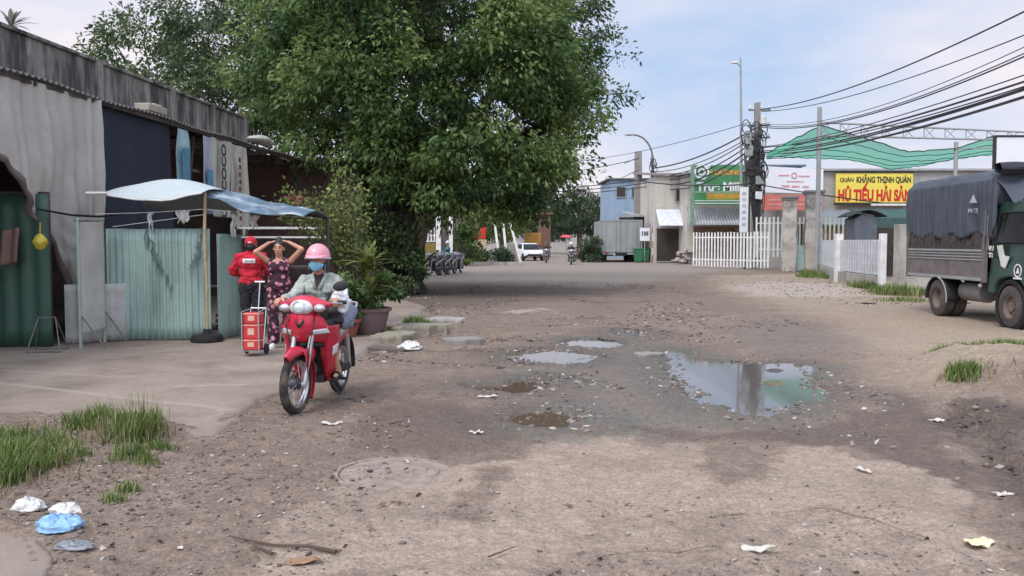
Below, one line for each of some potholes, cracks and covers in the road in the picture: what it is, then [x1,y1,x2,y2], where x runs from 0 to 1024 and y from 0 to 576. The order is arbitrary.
pothole [487,345,620,368]
manhole cover [332,457,449,490]
pothole [538,335,647,351]
pothole [634,345,879,425]
